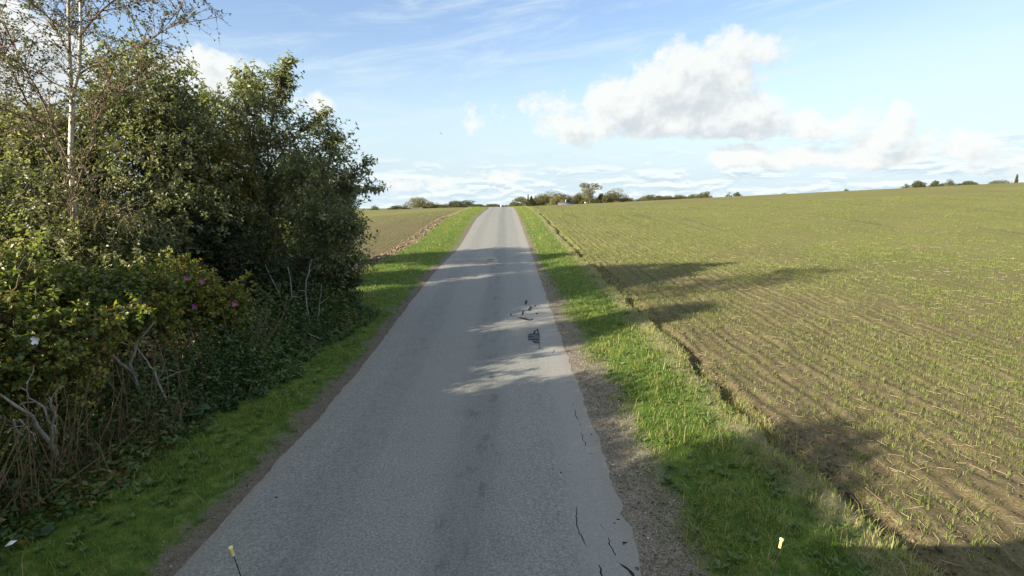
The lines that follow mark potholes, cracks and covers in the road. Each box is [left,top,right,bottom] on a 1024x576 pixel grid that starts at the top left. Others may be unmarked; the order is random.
crack [575,508,635,576]
